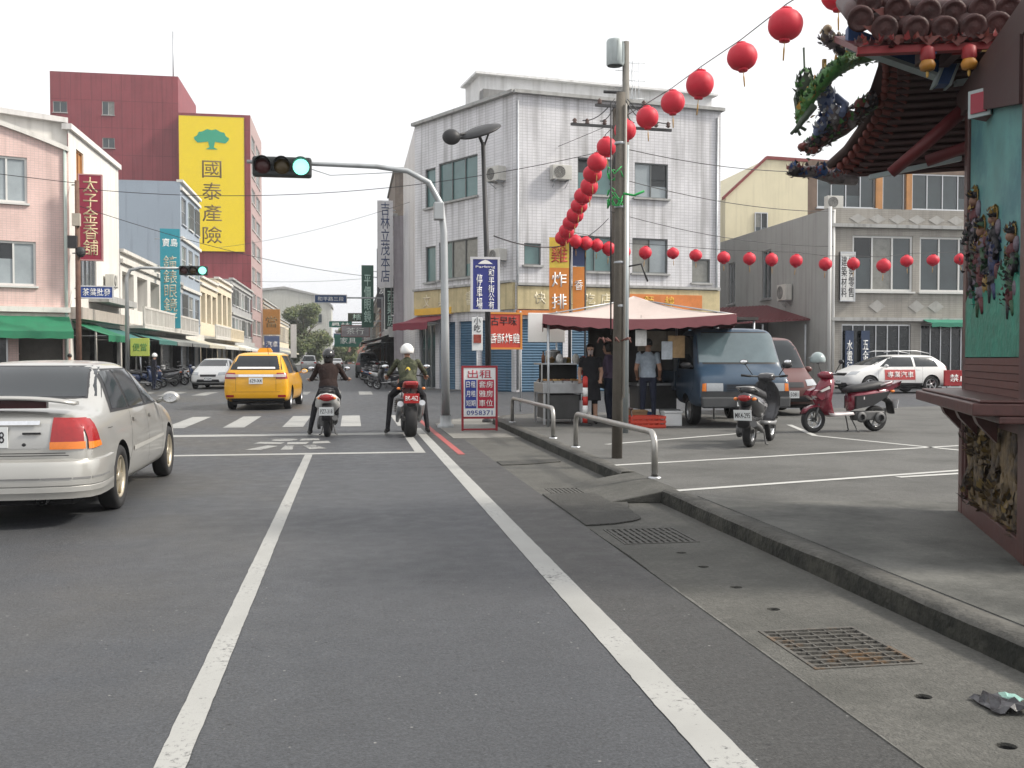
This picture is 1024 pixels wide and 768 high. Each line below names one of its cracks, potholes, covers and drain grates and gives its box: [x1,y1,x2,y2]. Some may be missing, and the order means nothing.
drain grate [603,527,700,545]
drain grate [758,626,922,670]
